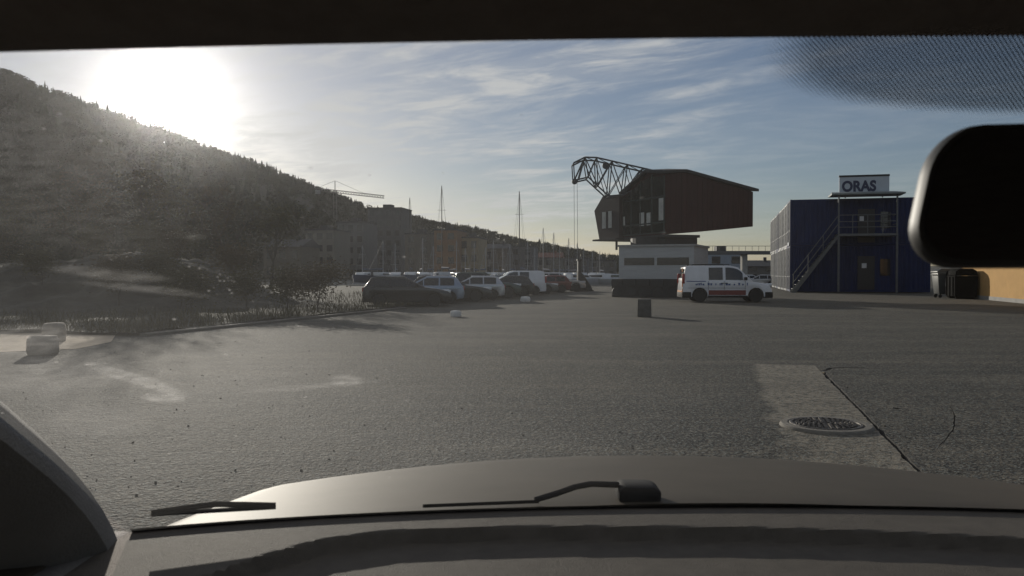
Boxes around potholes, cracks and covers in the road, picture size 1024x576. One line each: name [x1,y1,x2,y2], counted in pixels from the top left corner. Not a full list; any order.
manhole cover [779,416,875,435]
crack [822,367,956,472]
